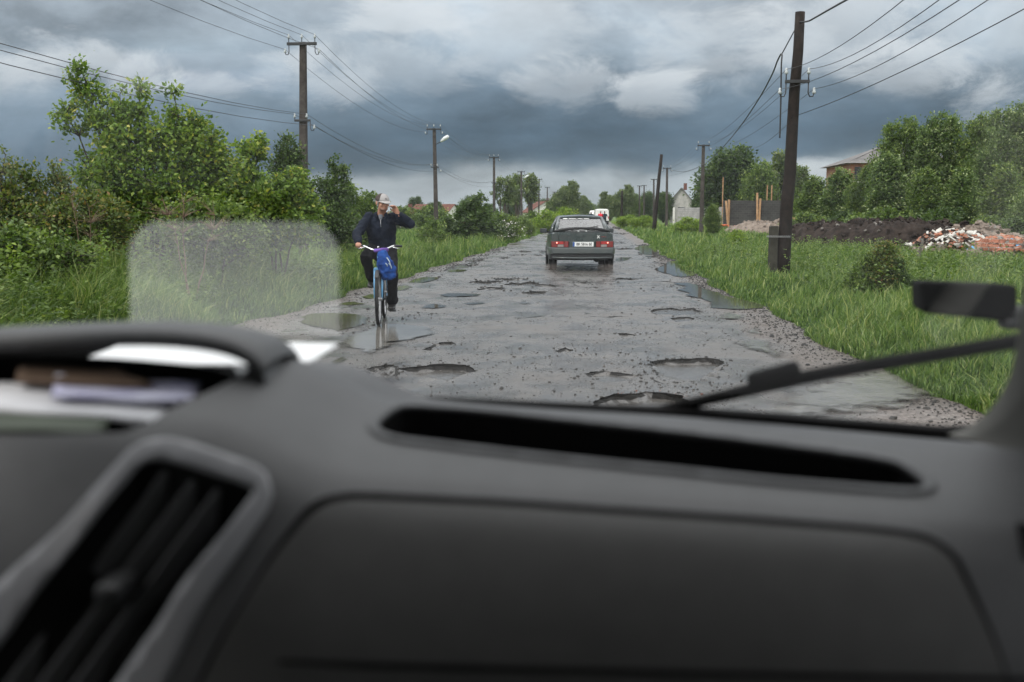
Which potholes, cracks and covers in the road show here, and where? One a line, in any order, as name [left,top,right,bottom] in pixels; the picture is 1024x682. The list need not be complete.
pothole [368,365,400,379]
pothole [593,391,684,405]
pothole [650,358,724,383]
pothole [651,308,701,316]
pothole [585,371,639,384]
pothole [398,364,476,380]
